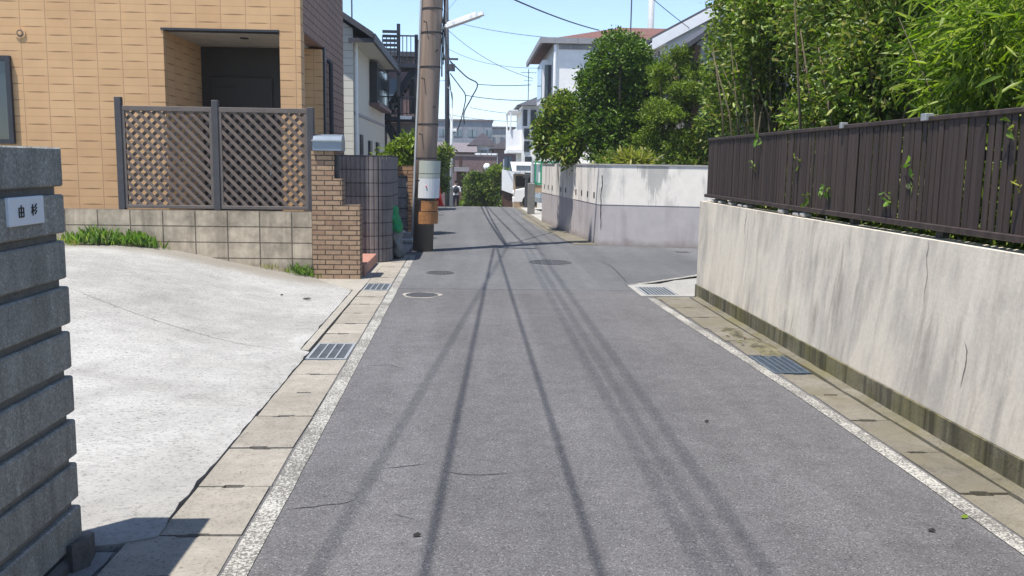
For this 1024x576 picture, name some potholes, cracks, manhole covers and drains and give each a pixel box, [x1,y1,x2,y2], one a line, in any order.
drain grate [362,283,392,291]
drain grate [305,343,356,360]
drain grate [749,356,811,375]
drain grate [636,287,677,295]
